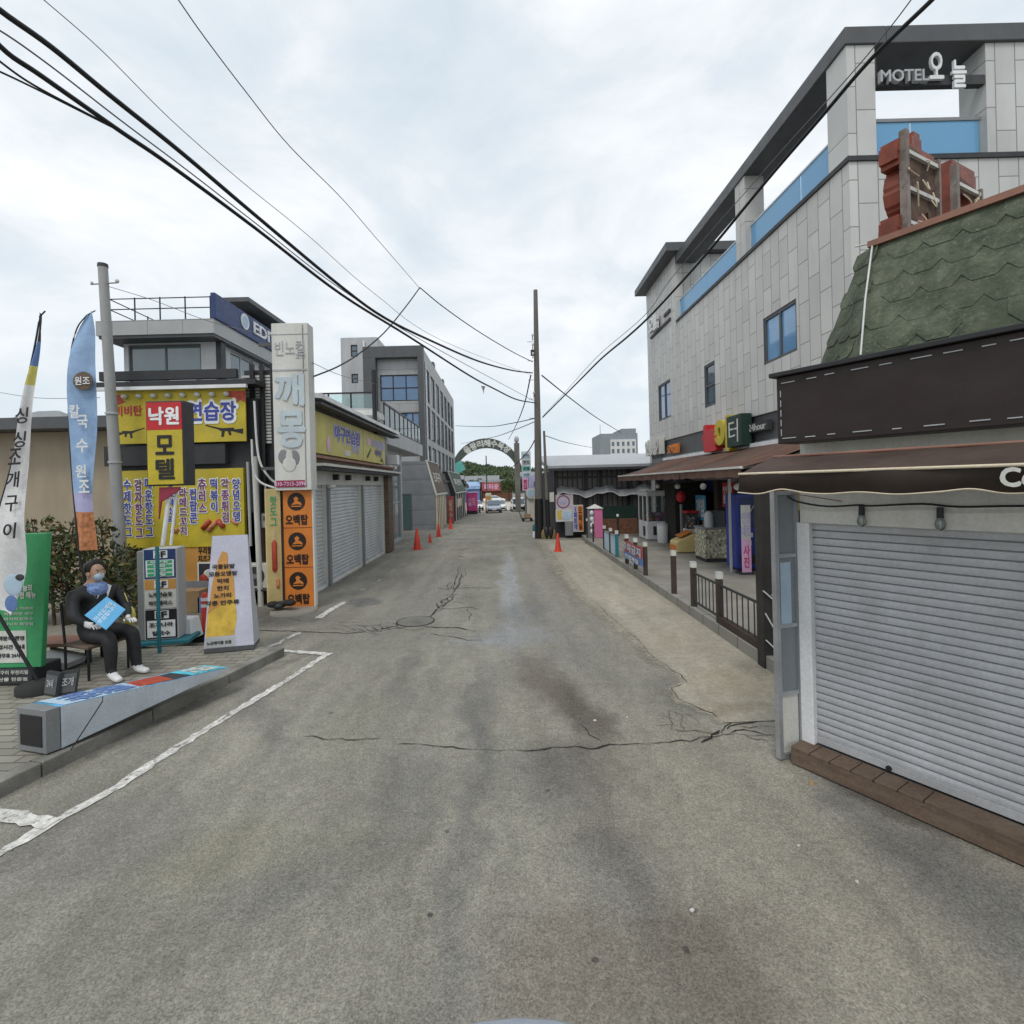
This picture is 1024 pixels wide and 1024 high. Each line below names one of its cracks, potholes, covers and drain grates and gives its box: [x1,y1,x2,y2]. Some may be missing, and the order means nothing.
crack [400,709,770,751]
manhole cover [396,616,435,627]
crack [259,539,477,640]
